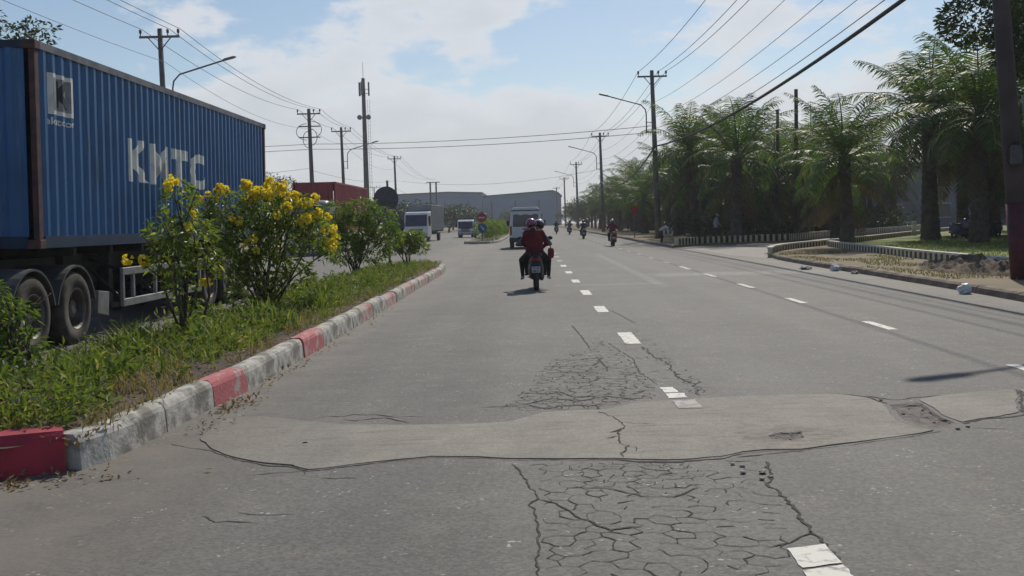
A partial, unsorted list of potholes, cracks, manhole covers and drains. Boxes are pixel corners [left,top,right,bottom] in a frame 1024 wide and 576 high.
pothole [890,403,955,428]
crack [172,311,939,576]
pothole [768,431,804,440]
